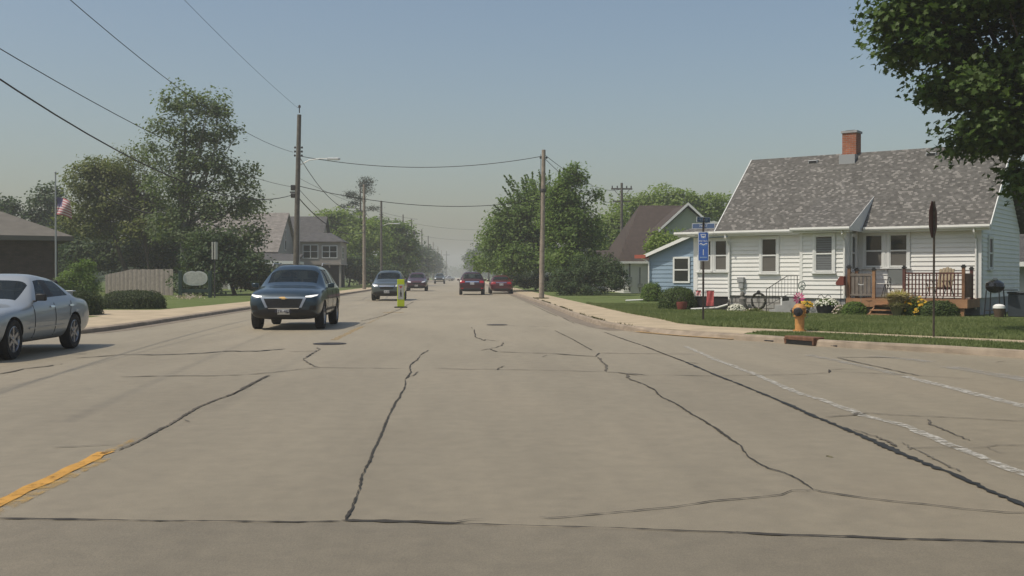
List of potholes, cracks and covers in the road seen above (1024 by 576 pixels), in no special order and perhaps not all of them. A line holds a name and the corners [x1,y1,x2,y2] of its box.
drain grate [783,335,824,346]
crack [3,326,1024,543]
